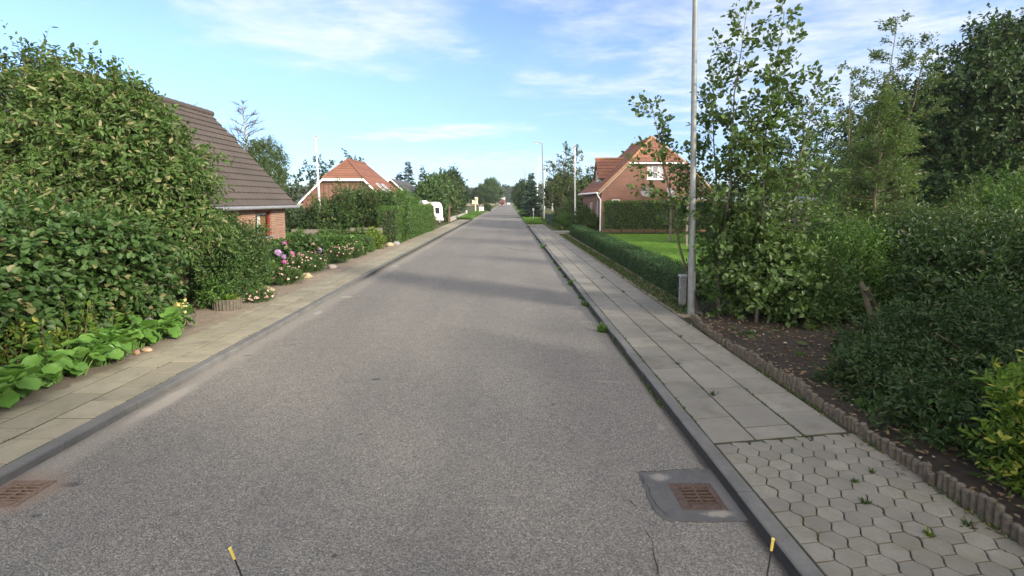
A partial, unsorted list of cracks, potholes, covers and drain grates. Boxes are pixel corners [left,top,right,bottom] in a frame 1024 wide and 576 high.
drain grate [668,483,729,510]
drain grate [0,480,57,507]
